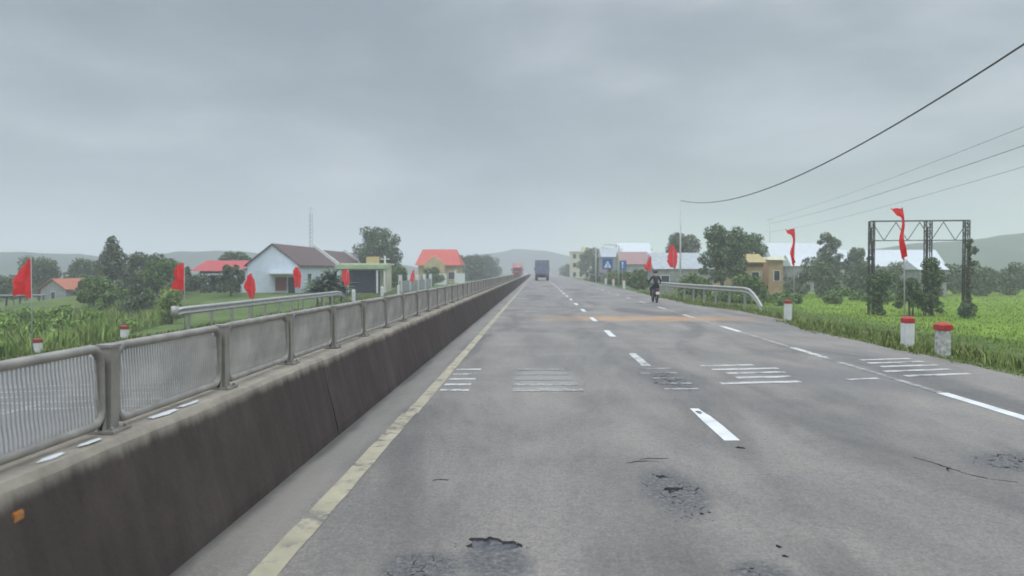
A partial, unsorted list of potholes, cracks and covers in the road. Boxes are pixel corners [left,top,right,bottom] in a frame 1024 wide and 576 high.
crack [914,454,1024,482]
pothole [466,536,523,552]
crack [384,553,450,576]
crack [628,458,711,518]
